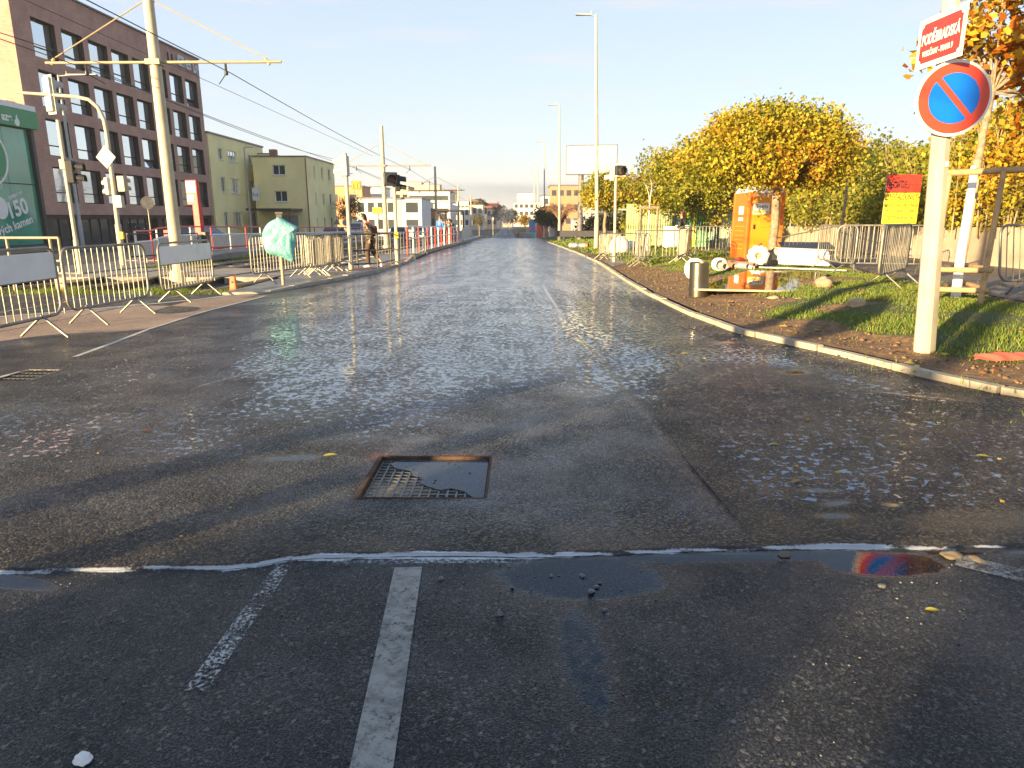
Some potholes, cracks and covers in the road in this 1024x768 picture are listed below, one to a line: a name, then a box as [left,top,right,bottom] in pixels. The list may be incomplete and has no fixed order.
drain grate [0,369,64,381]
